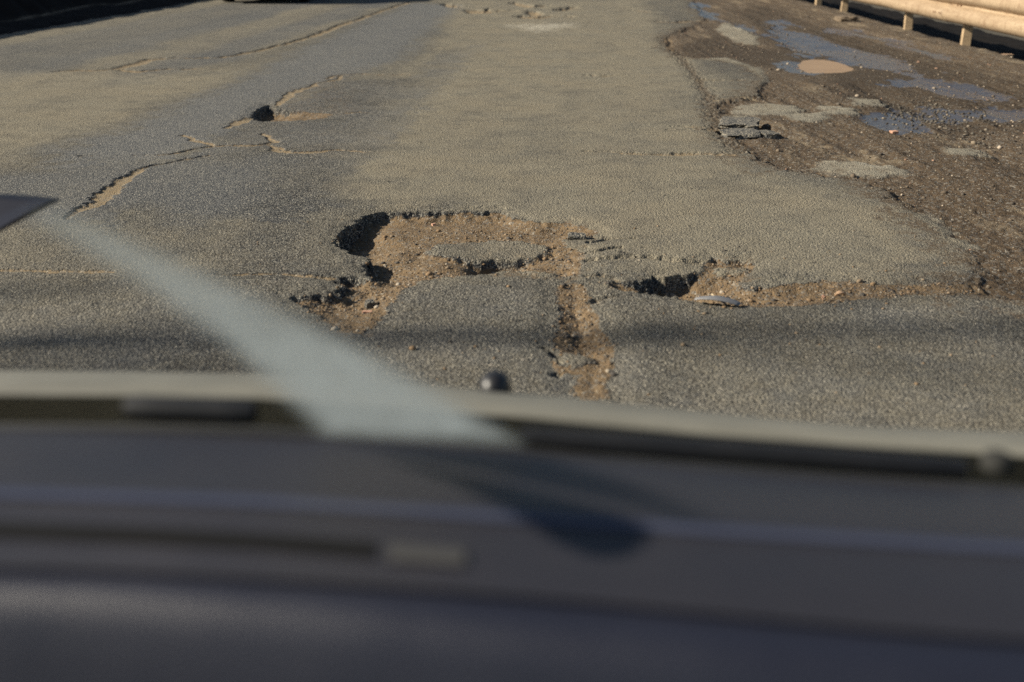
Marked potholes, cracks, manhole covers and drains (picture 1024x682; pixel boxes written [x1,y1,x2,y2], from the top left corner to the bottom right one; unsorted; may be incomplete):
pothole [549,282,620,402]
crack [63,133,385,220]
pothole [290,210,601,334]
pothole [251,105,338,122]
pothole [600,257,991,308]
